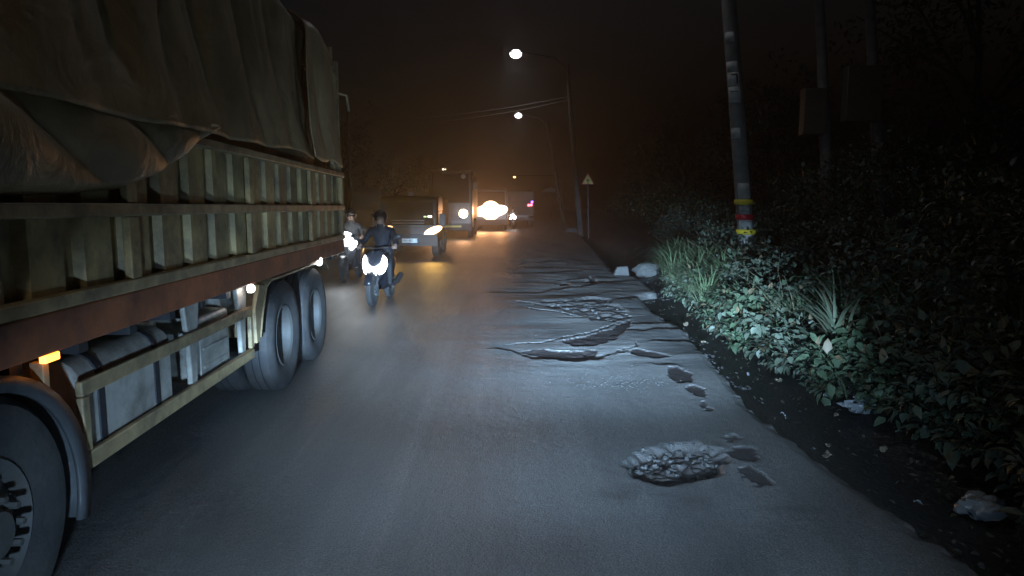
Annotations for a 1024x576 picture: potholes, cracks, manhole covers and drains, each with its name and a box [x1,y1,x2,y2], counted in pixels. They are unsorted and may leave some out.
pothole [562,319,633,347]
pothole [520,348,599,361]
pothole [666,365,694,383]
pothole [619,440,733,487]
crack [488,260,694,365]
pothole [736,464,776,488]
pothole [685,384,707,397]
pothole [726,445,761,462]
